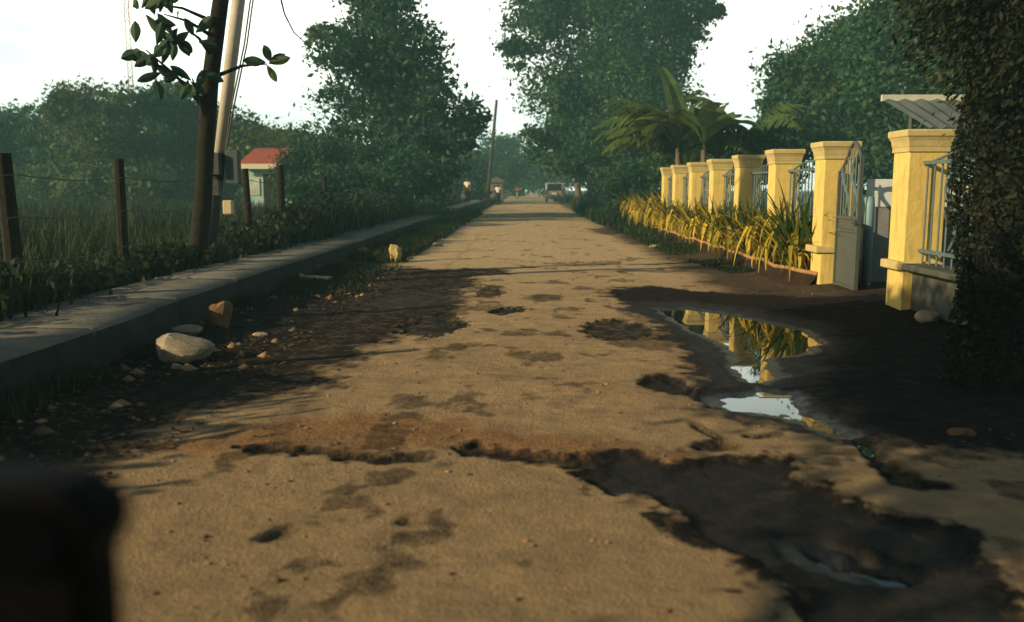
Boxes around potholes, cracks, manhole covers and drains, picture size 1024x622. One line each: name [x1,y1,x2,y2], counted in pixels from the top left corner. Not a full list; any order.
pothole [689,439,742,452]
pothole [634,372,702,397]
pothole [641,304,842,384]
pothole [486,305,533,316]
pothole [566,446,1024,622]
pothole [576,318,664,341]
